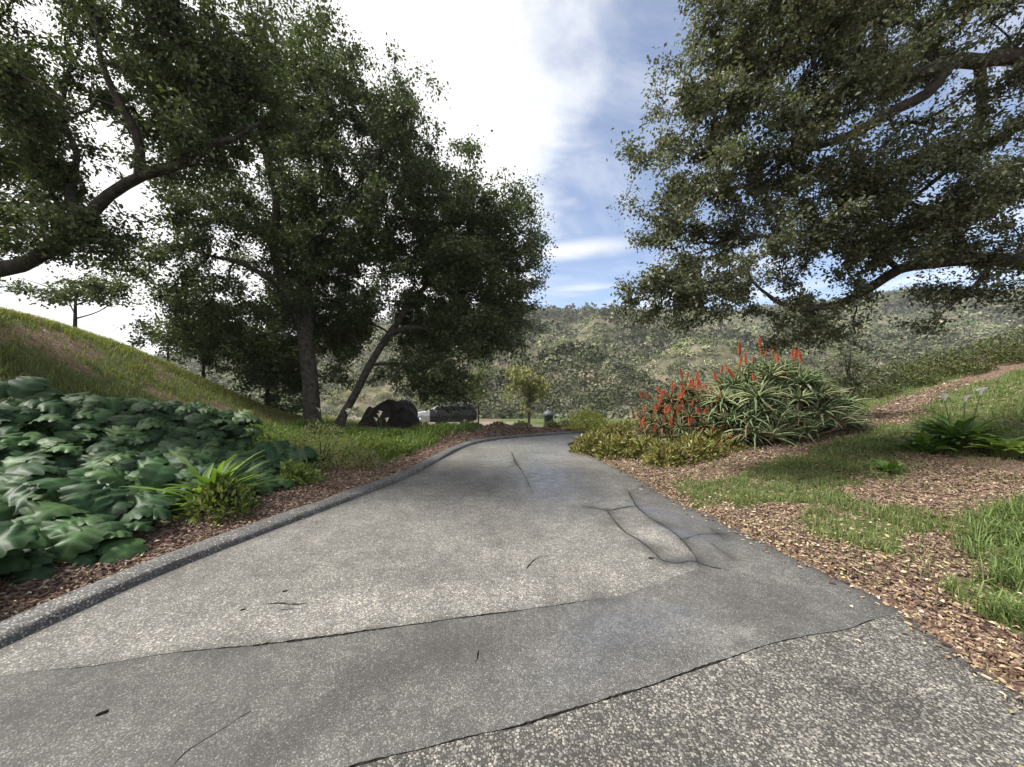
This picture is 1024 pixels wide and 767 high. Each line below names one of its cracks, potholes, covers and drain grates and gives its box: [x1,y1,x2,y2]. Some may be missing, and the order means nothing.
crack [584,491,732,569]
crack [56,600,586,670]
crack [350,618,878,767]
